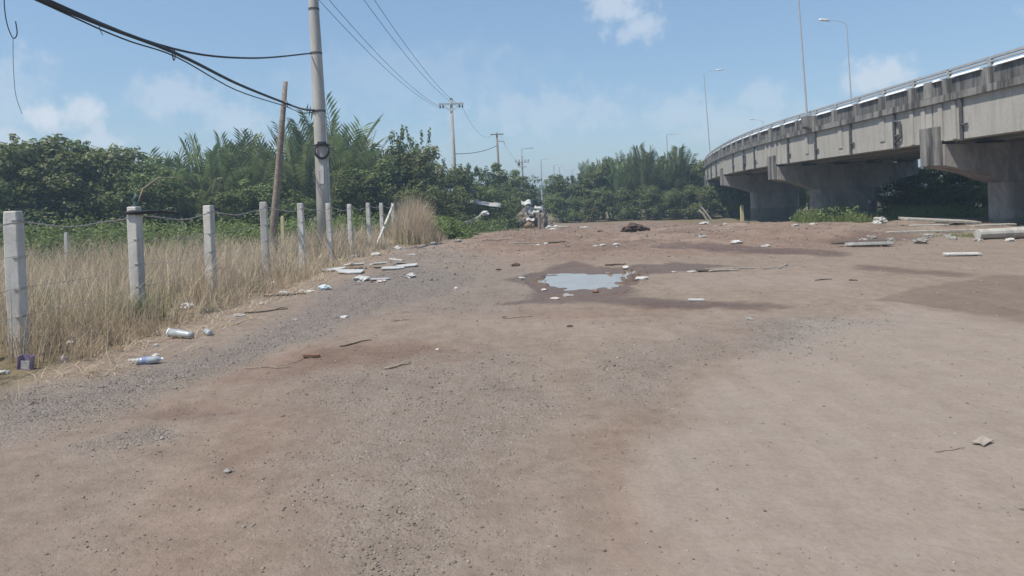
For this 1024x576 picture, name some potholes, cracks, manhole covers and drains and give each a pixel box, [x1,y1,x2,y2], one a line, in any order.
pothole [516,265,651,297]
